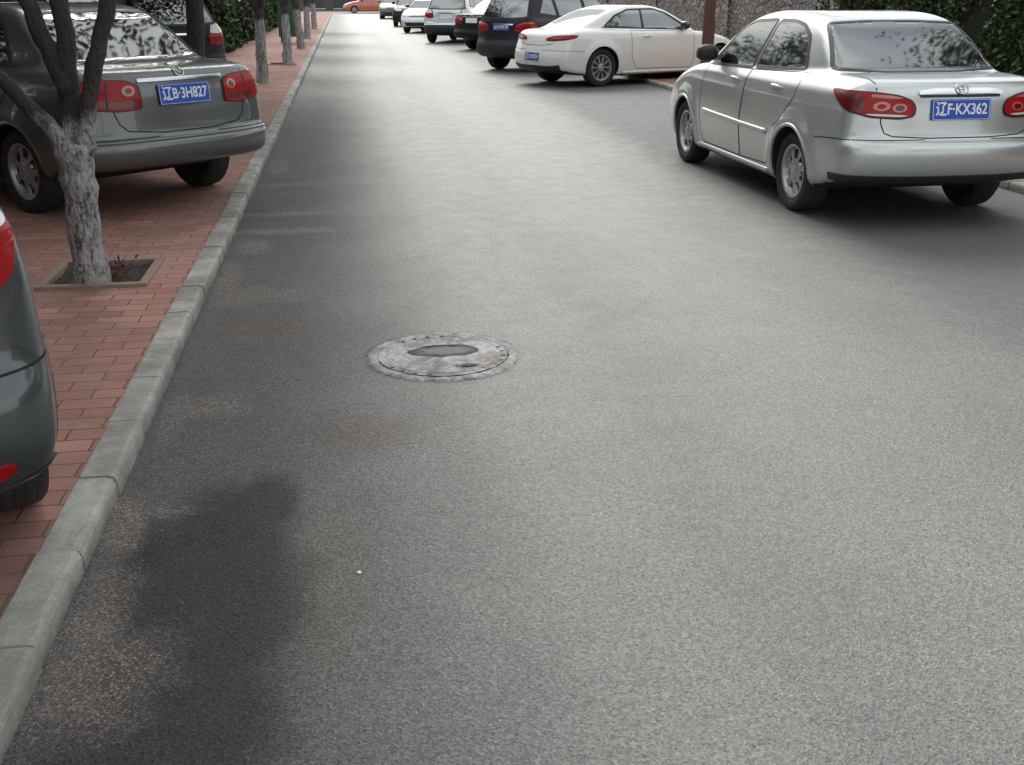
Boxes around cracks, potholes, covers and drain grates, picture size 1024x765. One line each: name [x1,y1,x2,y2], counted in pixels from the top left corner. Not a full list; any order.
manhole cover [366,333,519,382]
